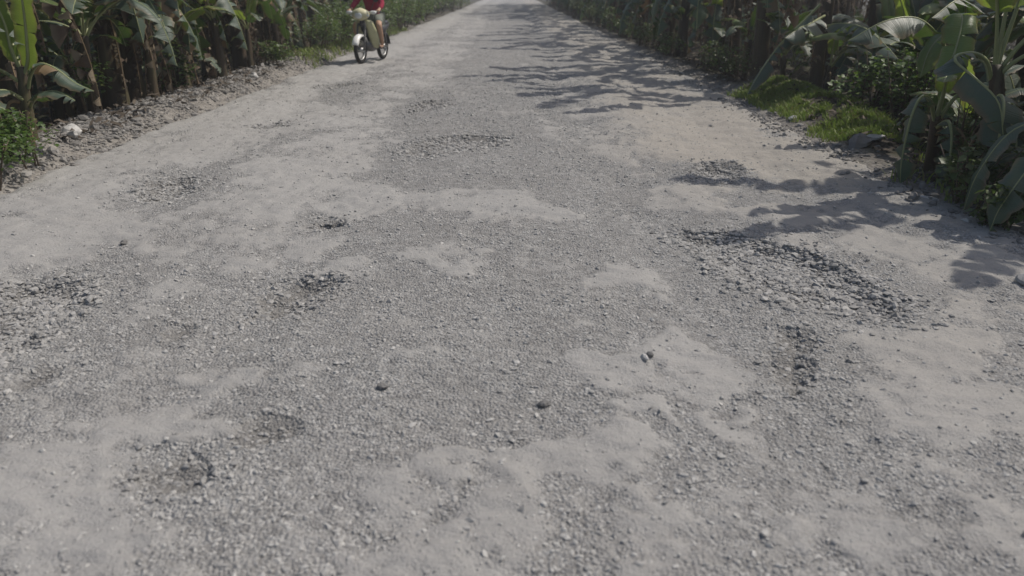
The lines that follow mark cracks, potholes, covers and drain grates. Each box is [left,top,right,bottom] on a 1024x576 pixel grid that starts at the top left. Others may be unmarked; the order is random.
pothole [109,170,221,207]
pothole [285,210,372,239]
pothole [644,221,956,340]
pothole [671,157,766,186]
pothole [389,133,521,162]
pothole [82,434,266,520]
pothole [396,97,462,115]
pothole [736,316,871,430]
